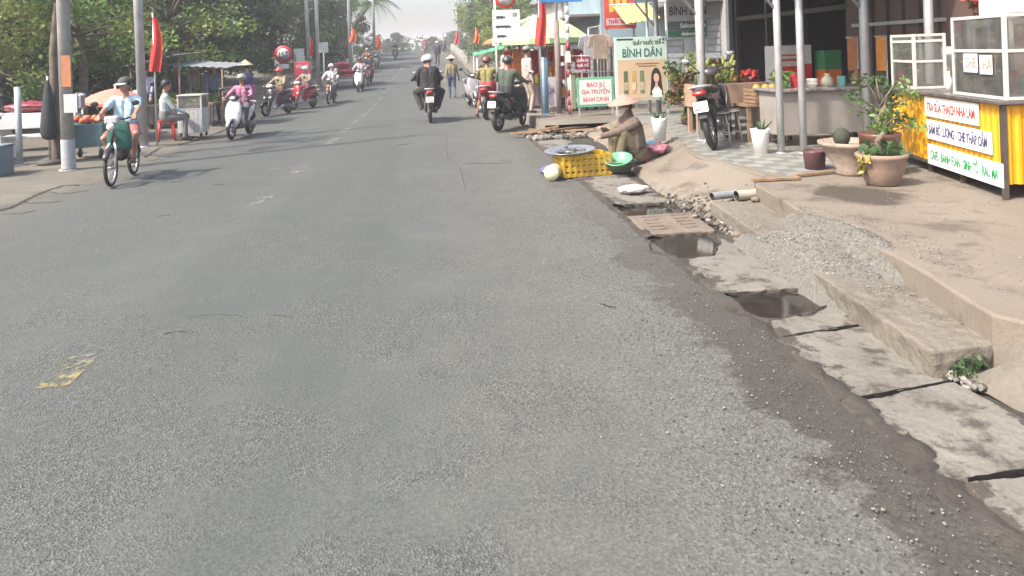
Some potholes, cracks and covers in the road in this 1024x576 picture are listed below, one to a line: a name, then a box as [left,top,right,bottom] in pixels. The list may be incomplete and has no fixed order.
pothole [642,232,722,260]
pothole [725,288,827,323]
crack [162,314,292,336]
